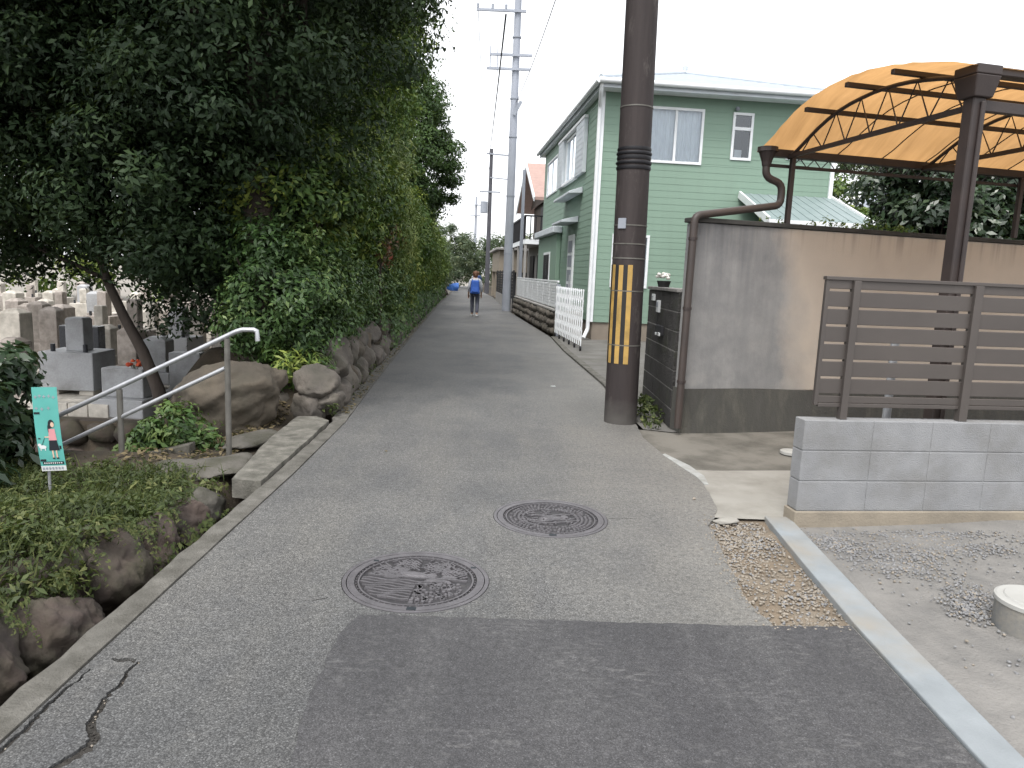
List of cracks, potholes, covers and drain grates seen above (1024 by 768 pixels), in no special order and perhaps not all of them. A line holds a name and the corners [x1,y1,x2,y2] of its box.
crack [0,658,140,768]
manhole cover [494,500,608,538]
manhole cover [342,552,489,613]
